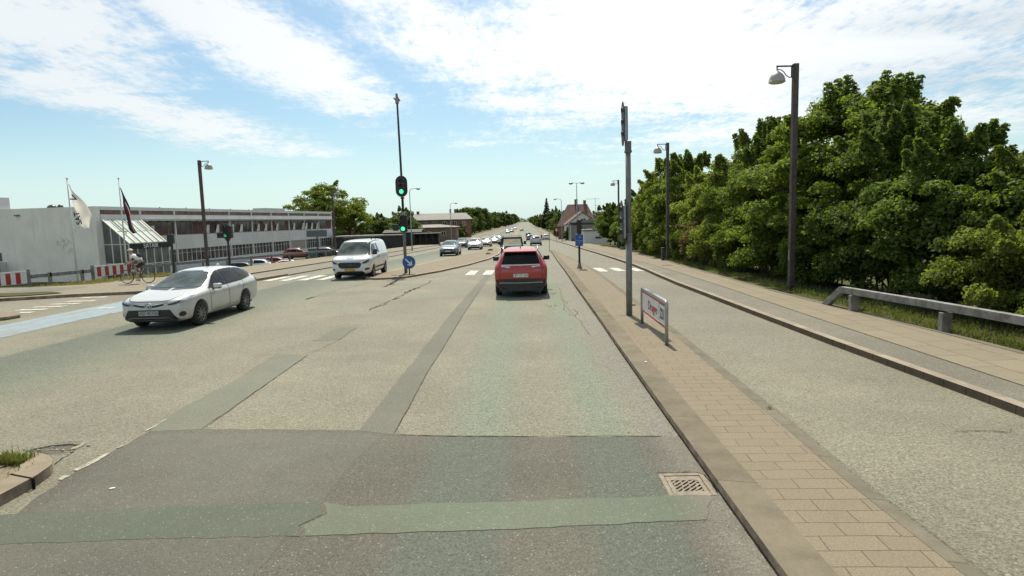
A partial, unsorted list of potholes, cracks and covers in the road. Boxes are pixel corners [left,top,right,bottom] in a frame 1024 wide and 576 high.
drain grate [658,473,717,496]
crack [369,279,431,310]
